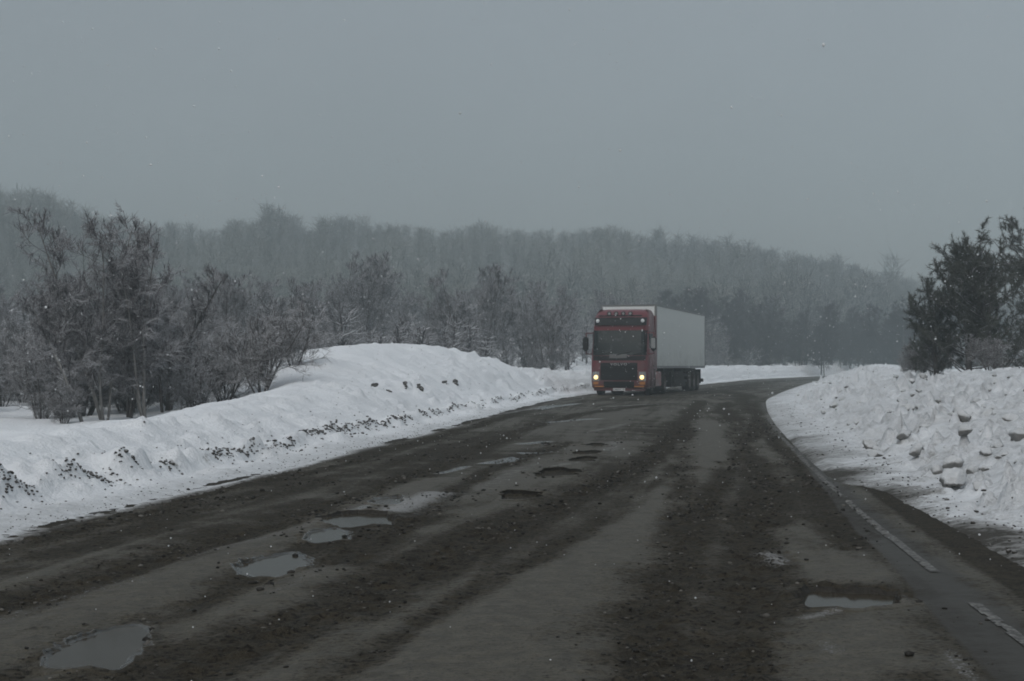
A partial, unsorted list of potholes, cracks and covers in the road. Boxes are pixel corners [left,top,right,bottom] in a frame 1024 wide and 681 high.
pothole [218,551,325,582]
pothole [303,509,411,529]
pothole [778,580,920,612]
pothole [486,489,553,501]
pothole [525,467,595,478]
pothole [558,455,606,463]
pothole [293,525,364,546]
pothole [25,619,170,677]
pothole [361,494,414,506]
